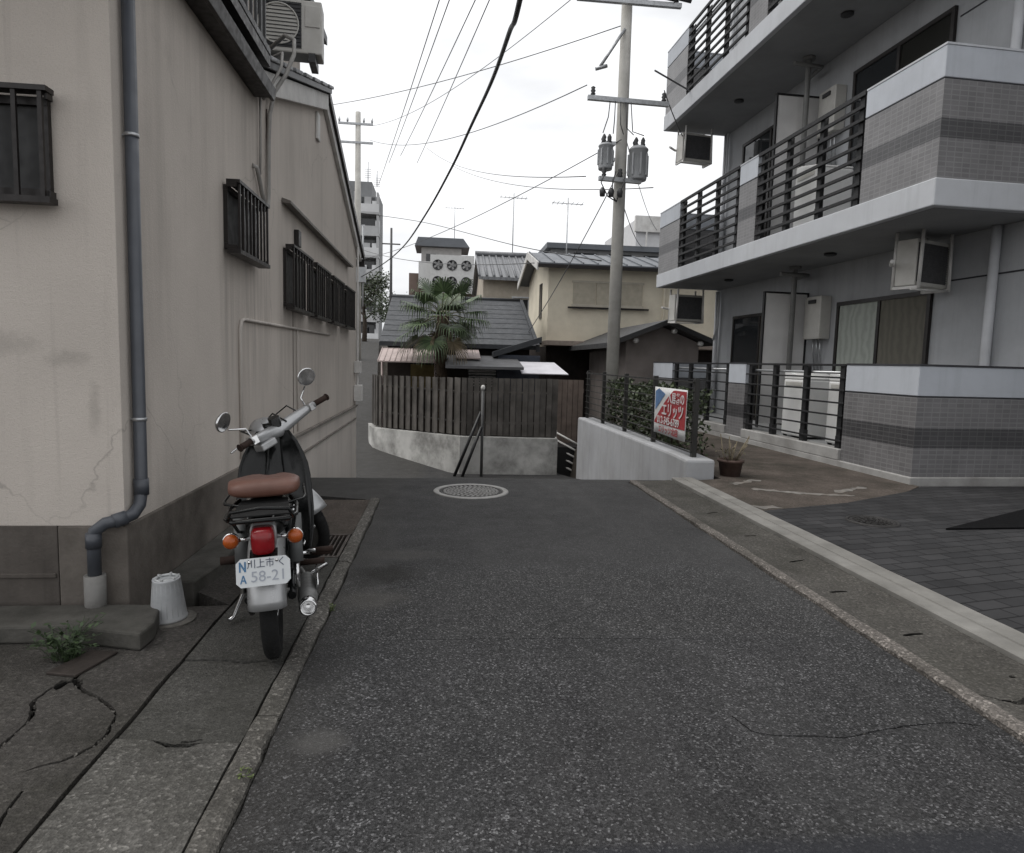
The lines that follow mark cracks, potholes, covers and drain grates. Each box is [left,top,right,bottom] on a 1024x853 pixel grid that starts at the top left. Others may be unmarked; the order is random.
crack [1,675,117,757]
manhole cover [845,515,901,528]
drain grate [320,534,351,560]
manhole cover [433,484,509,499]
